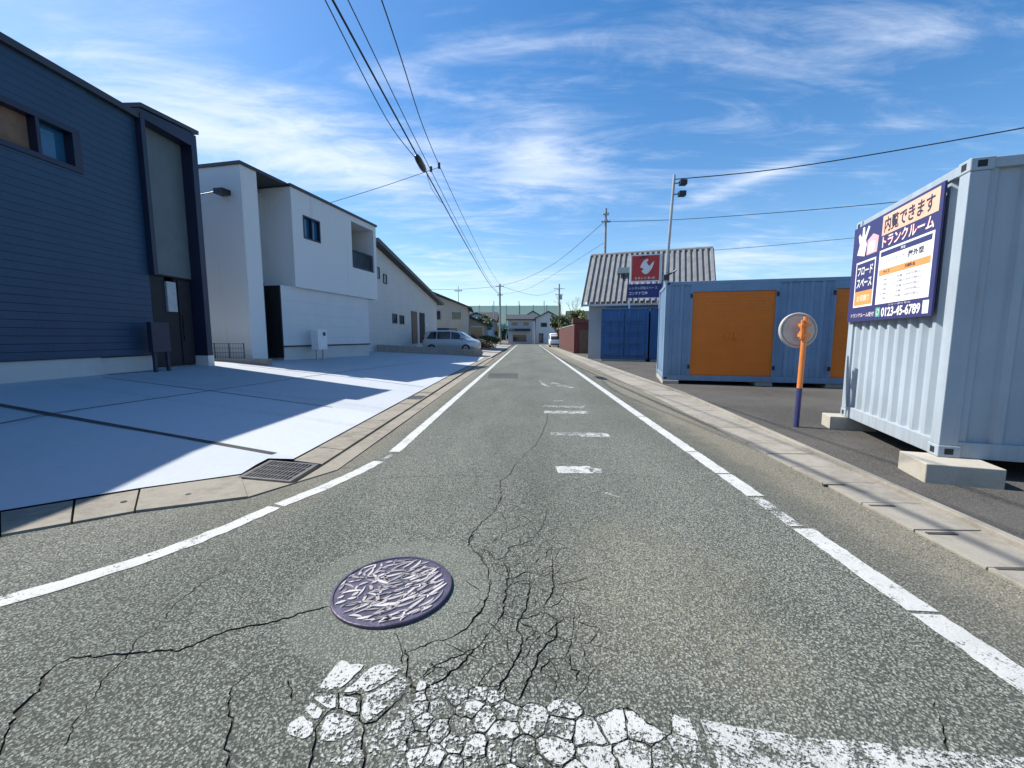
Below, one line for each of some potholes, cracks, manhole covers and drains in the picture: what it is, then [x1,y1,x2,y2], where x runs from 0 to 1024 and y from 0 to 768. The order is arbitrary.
crack [933,702,949,761]
crack [0,465,684,768]
drain grate [239,460,319,483]
manhole cover [330,556,452,630]
